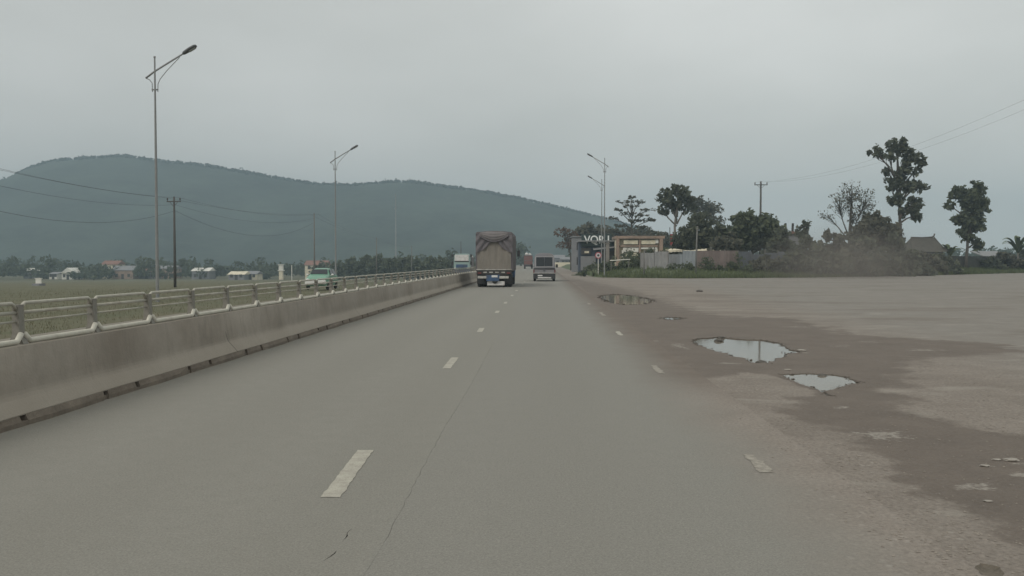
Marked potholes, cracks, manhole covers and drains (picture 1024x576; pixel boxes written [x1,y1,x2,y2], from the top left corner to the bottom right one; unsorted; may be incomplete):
pothole [782,374,860,396]
pothole [693,337,799,363]
pothole [598,294,655,305]
pothole [975,563,1005,576]
